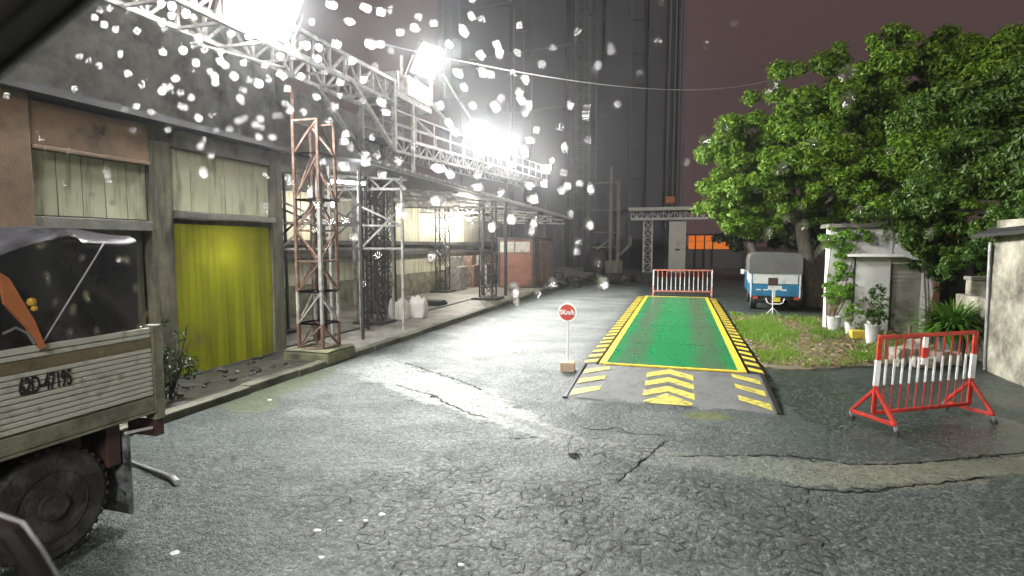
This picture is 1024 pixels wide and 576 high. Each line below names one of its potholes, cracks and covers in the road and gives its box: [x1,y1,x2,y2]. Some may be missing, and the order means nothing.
crack [271,426,1024,576]
crack [396,363,486,418]
